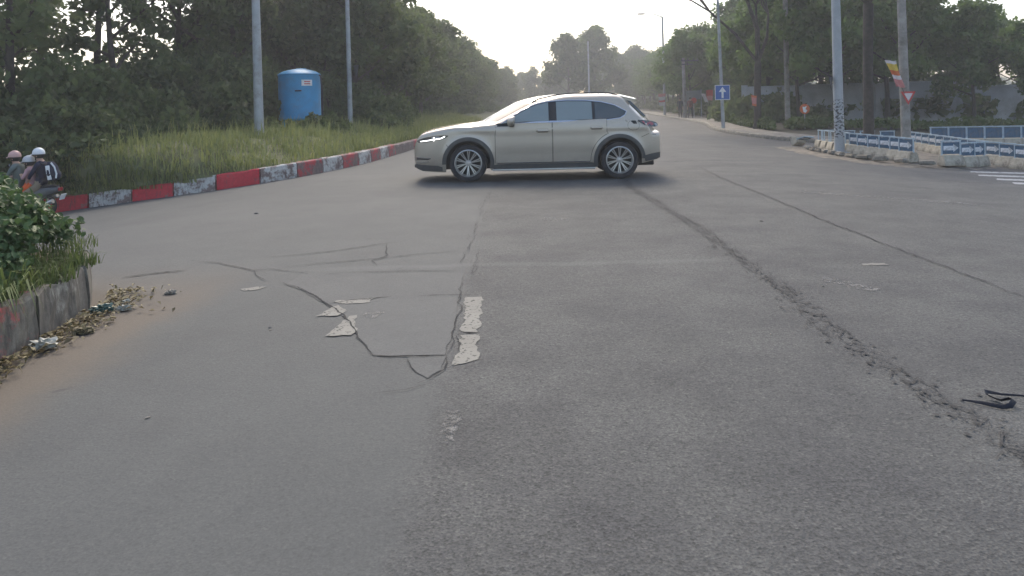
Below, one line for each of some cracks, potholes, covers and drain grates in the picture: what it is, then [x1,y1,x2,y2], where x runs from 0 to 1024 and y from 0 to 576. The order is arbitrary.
crack [128,194,490,280]
crack [283,282,481,393]
crack [620,179,1024,465]
